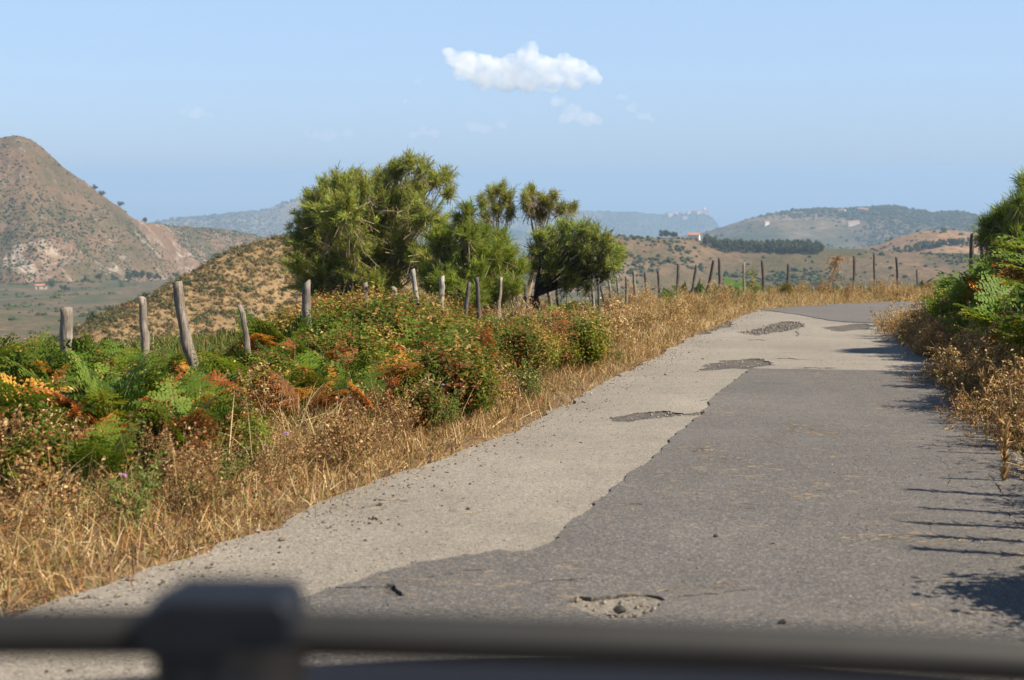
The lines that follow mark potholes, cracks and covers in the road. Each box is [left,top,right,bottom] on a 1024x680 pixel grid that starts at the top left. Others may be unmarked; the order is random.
pothole [573,596,662,620]
